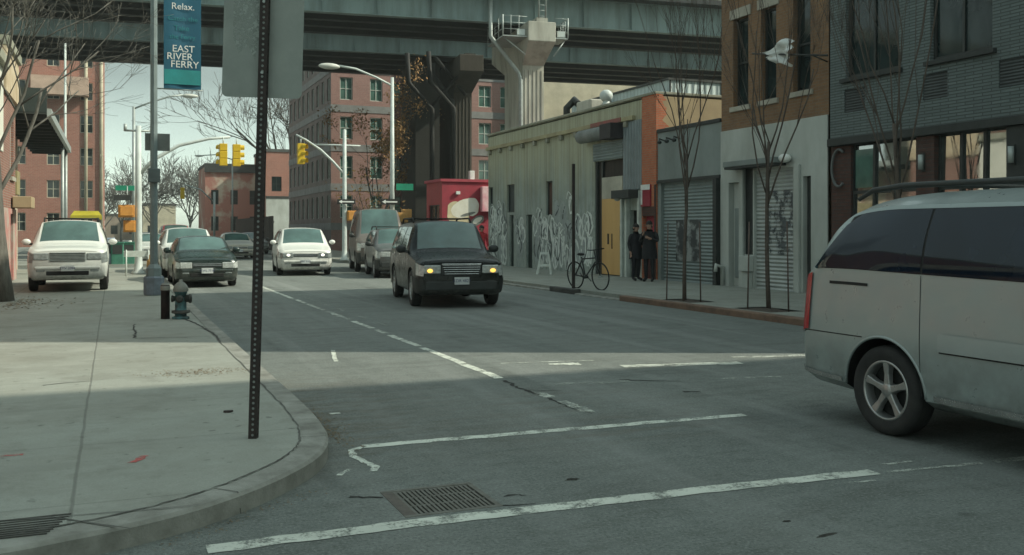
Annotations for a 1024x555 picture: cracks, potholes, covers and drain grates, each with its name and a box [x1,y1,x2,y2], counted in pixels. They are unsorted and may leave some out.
drain grate [380,482,503,518]
crack [503,380,590,413]
crack [132,319,221,342]
